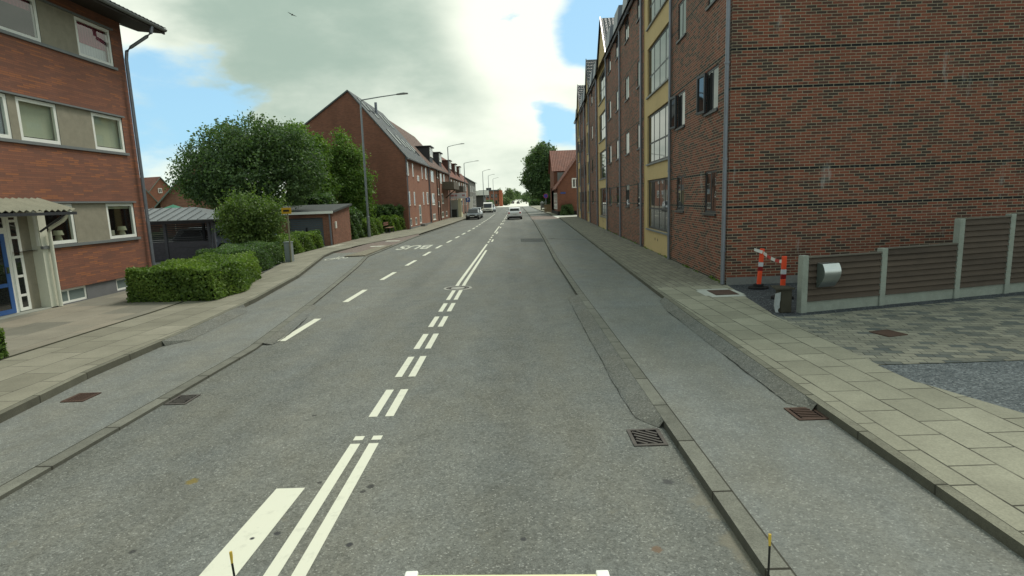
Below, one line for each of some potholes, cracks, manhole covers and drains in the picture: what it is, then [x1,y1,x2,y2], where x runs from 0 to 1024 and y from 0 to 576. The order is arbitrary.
drain grate [784,407,829,421]
drain grate [163,394,201,405]
drain grate [626,428,668,447]
manhole cover [869,329,908,337]
drain grate [60,392,102,403]
